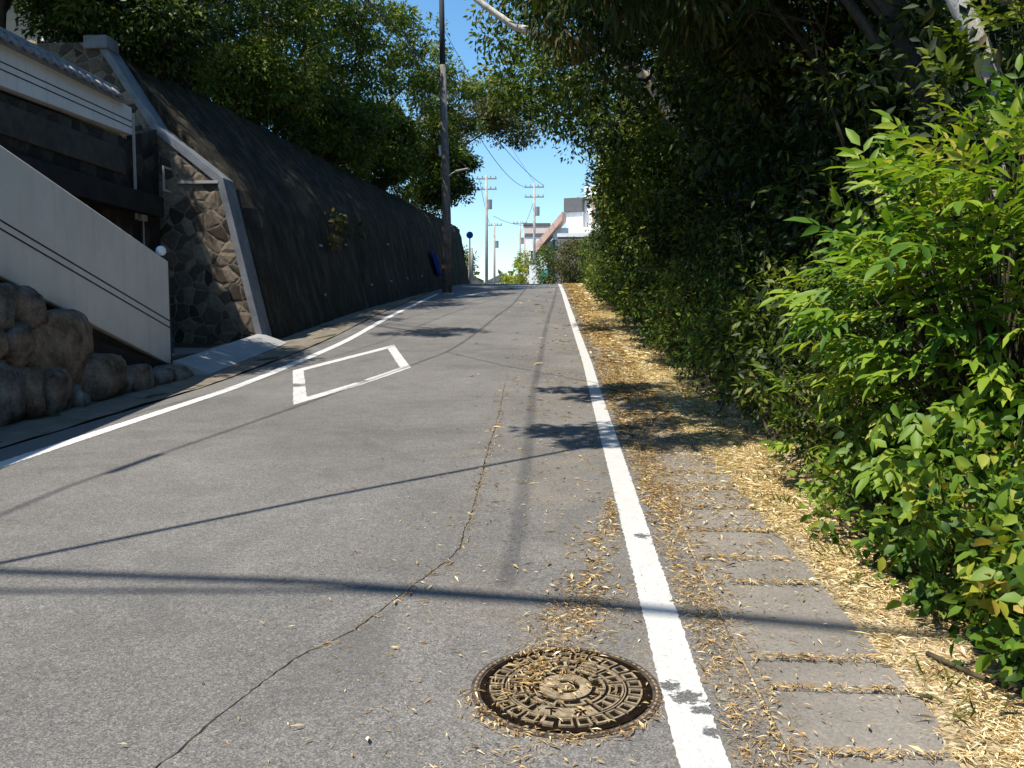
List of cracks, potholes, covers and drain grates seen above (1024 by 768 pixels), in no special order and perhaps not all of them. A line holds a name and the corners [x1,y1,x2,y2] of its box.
manhole cover [471,647,662,740]
crack [155,369,508,768]
